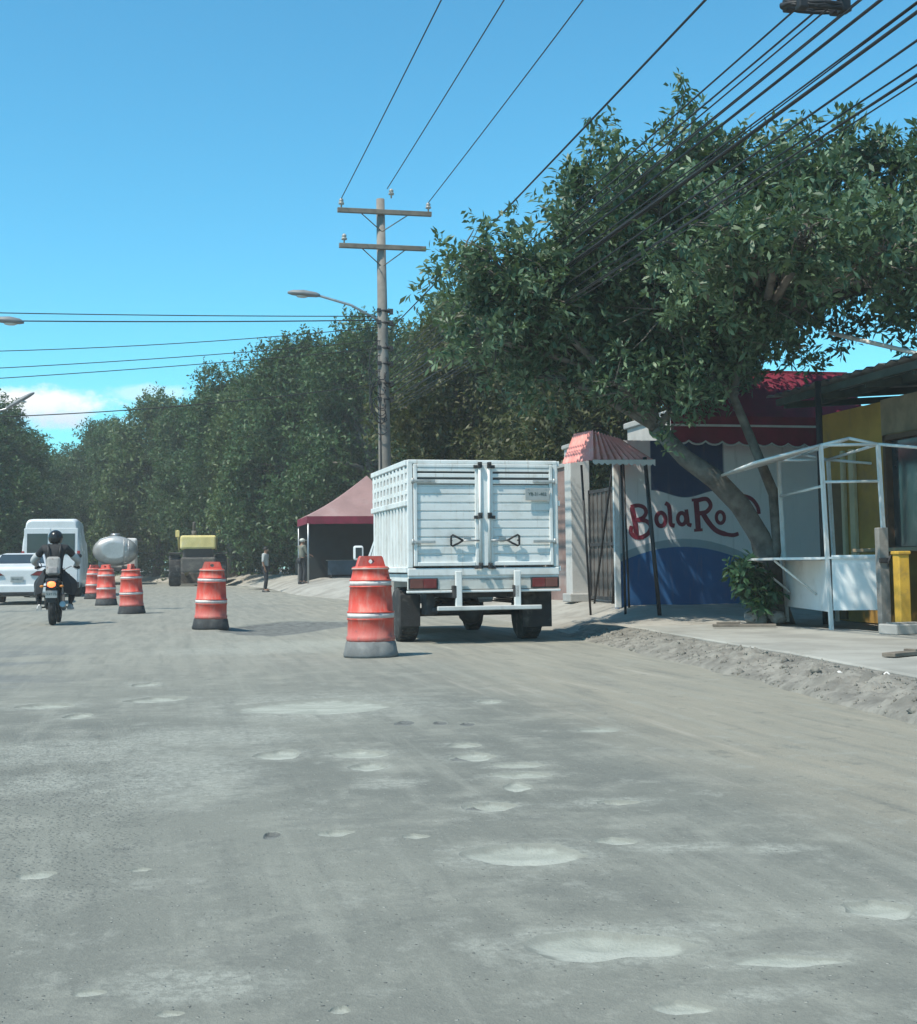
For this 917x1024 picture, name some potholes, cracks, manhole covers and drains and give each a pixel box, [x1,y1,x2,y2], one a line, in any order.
pothole [728,954,851,968]
pothole [225,698,402,715]
pothole [445,752,497,761]
pothole [461,802,519,812]
pothole [252,749,302,760]
pothole [840,899,915,920]
pothole [72,989,107,997]
pothole [502,782,533,792]
pothole [592,837,637,845]
pothole [15,871,57,880]
pothole [648,1000,717,1015]
pothole [459,843,590,866]
